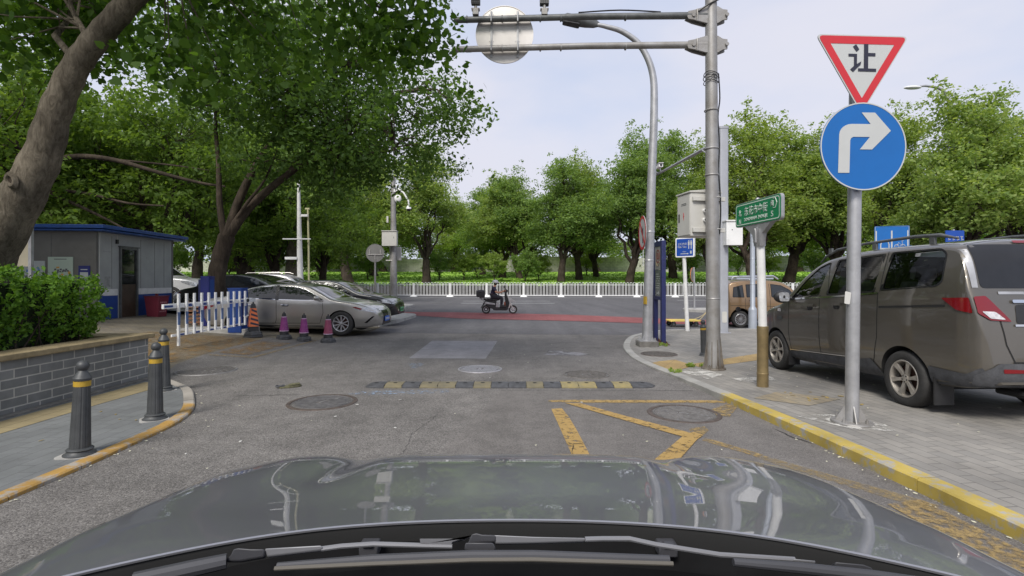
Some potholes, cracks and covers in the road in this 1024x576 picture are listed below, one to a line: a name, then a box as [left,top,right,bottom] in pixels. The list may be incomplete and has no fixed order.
manhole cover [647,404,722,424]
manhole cover [563,370,610,379]
manhole cover [286,394,358,411]
manhole cover [458,365,502,373]
